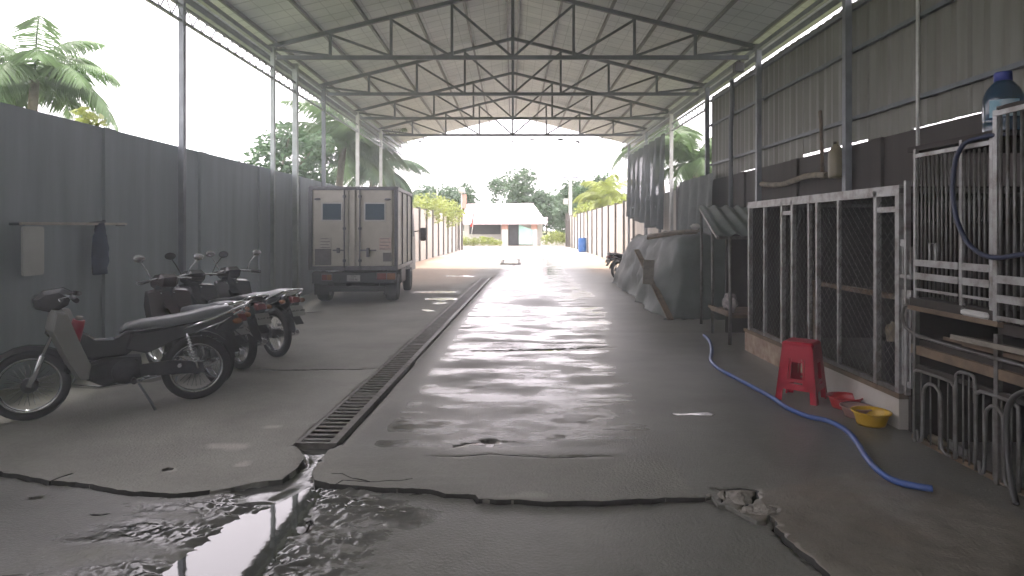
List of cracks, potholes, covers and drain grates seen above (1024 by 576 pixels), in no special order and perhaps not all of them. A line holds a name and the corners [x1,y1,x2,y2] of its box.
drain grate [349,365,409,401]
drain grate [406,329,443,348]
drain grate [438,308,462,319]
drain grate [448,301,469,310]
drain grate [424,317,454,331]
drain grate [384,345,428,369]
drain grate [295,396,380,449]
crack [303,473,759,534]
crack [0,471,210,516]
